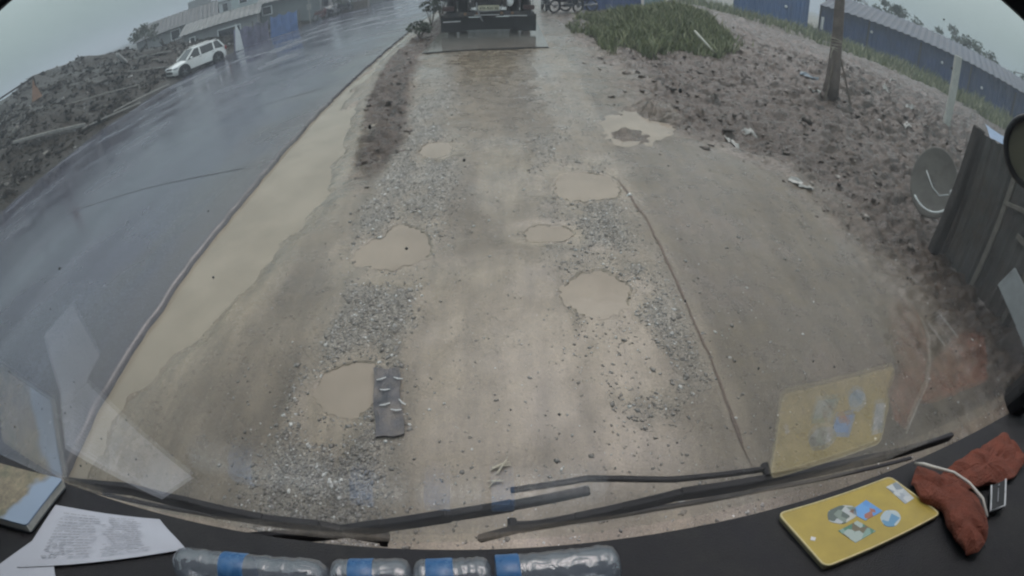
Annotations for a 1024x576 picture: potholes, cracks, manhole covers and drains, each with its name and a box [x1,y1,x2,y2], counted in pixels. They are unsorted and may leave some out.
crack [63,166,260,215]
pothole [348,220,438,273]
pothole [312,357,380,420]
crack [616,177,753,467]
pothole [521,223,577,244]
pothole [415,141,454,159]
pothole [558,266,637,321]
pothole [548,170,626,205]
pothole [597,95,689,148]
